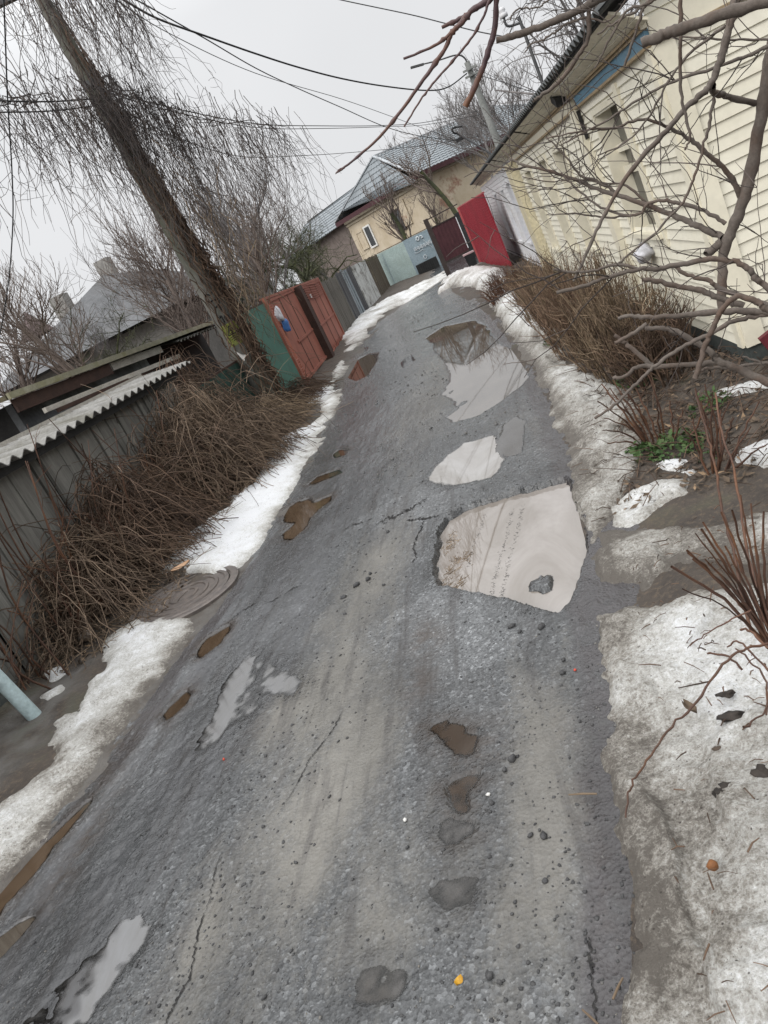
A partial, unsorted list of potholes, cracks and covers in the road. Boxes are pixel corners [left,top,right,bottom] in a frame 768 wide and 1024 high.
pothole [495,414,528,459]
pothole [279,492,335,542]
crack [343,497,438,562]
manhole cover [128,565,239,622]
pothole [442,766,484,815]
pothole [424,319,532,424]
pothole [190,646,309,762]
pothole [427,714,480,759]
pothole [424,432,508,489]
pothole [430,475,589,613]
pothole [306,467,343,486]
pothole [193,623,232,659]
